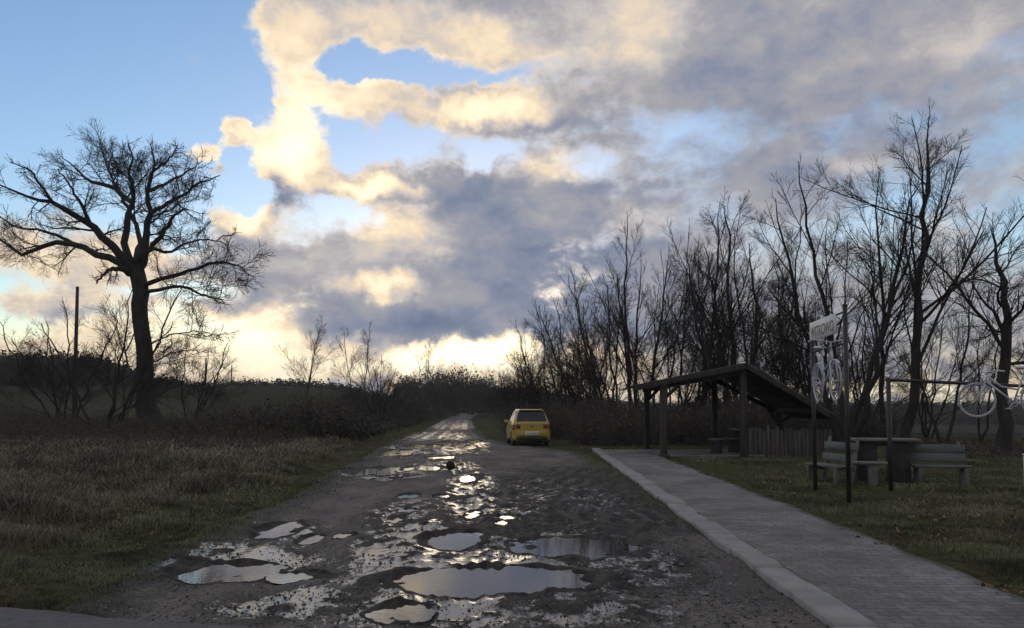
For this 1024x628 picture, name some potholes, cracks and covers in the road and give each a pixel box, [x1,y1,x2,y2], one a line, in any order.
pothole [503,533,651,562]
pothole [412,527,496,552]
pothole [249,519,311,541]
pothole [294,533,326,546]
pothole [358,597,439,626]
pothole [356,560,613,601]
pothole [156,556,294,586]
pothole [367,448,417,457]
pothole [339,465,406,477]
